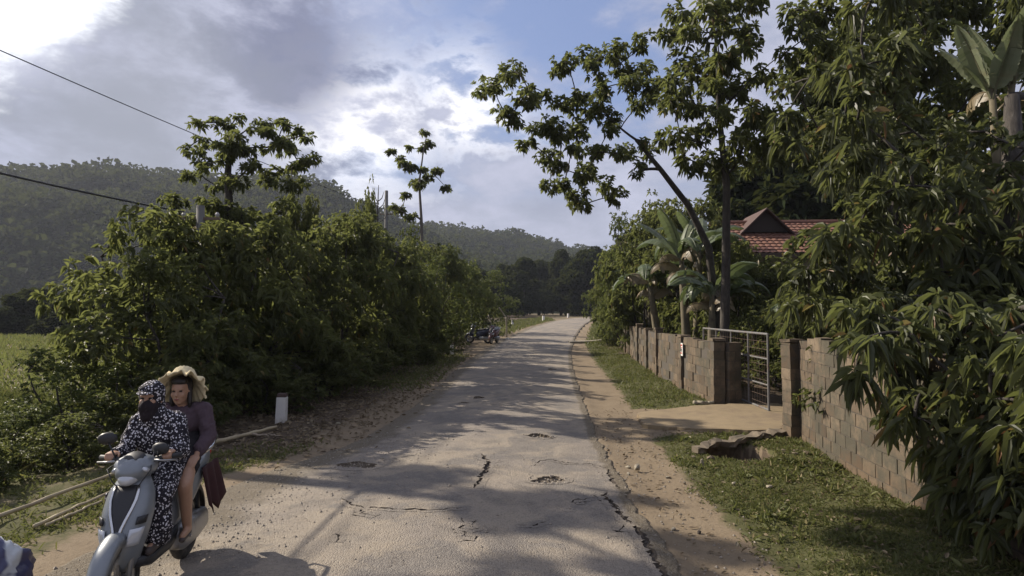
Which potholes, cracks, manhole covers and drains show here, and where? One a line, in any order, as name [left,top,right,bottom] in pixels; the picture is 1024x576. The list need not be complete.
crack [329,453,503,542]
crack [516,458,678,576]
pothole [329,460,385,471]
pothole [523,475,573,485]
